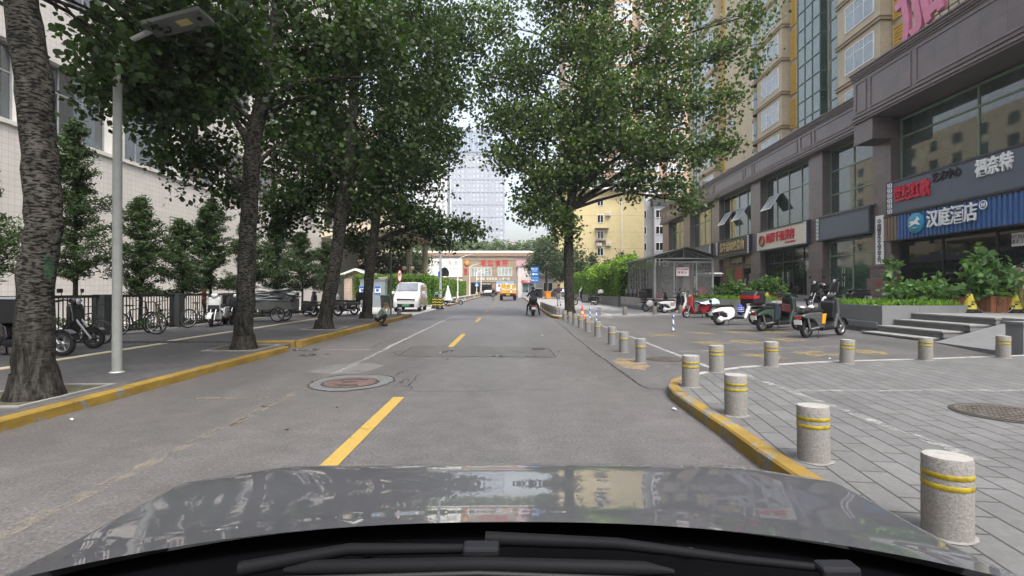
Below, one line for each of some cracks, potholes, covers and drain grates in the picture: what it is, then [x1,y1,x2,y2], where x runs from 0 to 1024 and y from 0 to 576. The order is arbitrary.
manhole cover [948,403,1024,423]
crack [307,342,501,392]
manhole cover [309,375,393,391]
